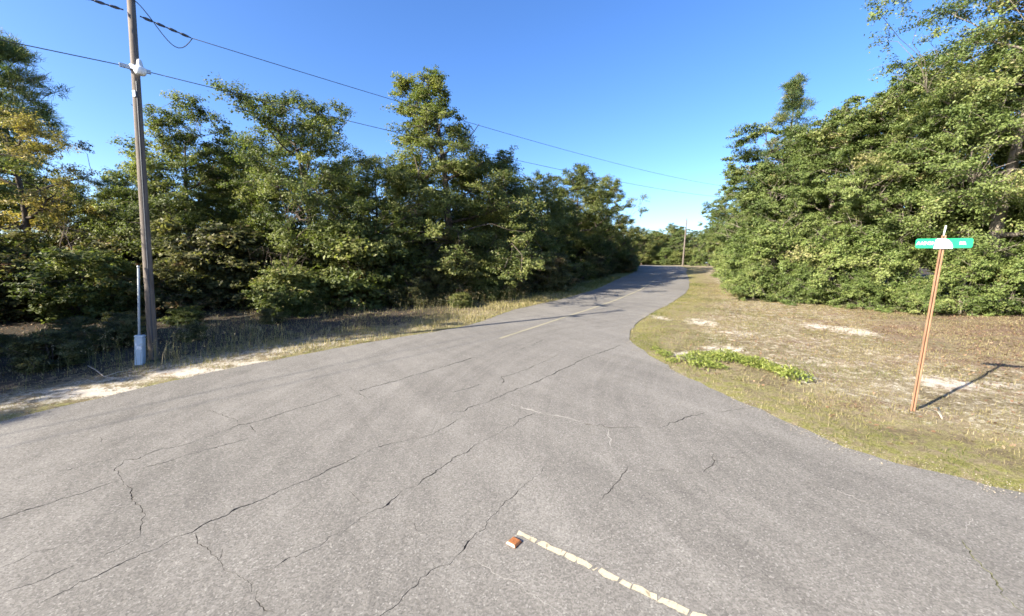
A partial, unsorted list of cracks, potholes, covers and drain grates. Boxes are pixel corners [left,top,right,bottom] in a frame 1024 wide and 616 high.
crack [251,341,620,574]
crack [962,519,1022,612]
crack [380,463,559,616]
crack [1,395,458,613]
